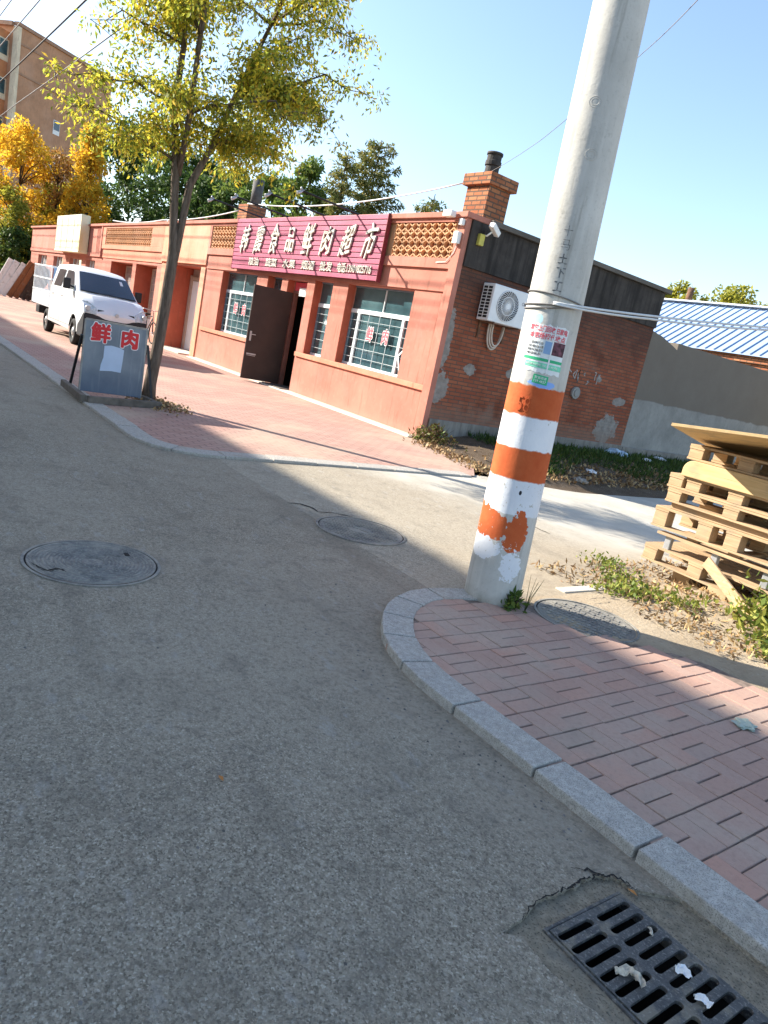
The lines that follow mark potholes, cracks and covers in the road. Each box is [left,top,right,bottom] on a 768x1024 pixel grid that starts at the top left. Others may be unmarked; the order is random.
manhole cover [20,540,161,588]
manhole cover [534,598,640,643]
drain grate [542,891,768,1024]
manhole cover [316,516,406,546]
crack [522,867,633,920]
